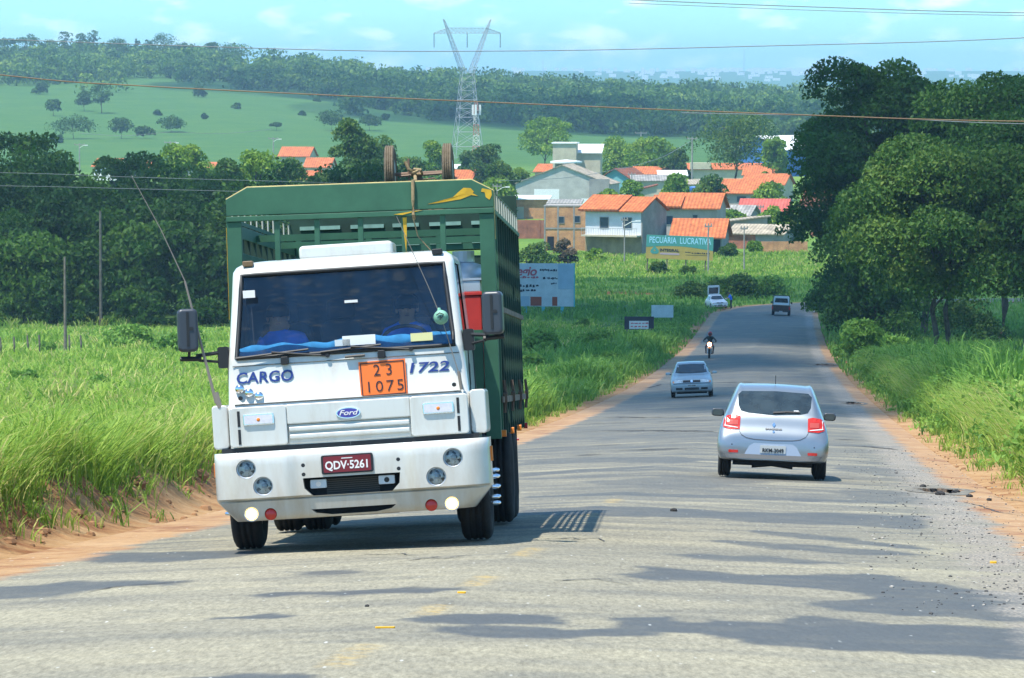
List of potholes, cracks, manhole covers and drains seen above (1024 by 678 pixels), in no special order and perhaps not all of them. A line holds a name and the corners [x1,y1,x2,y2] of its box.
pothole [905,486,975,495]
